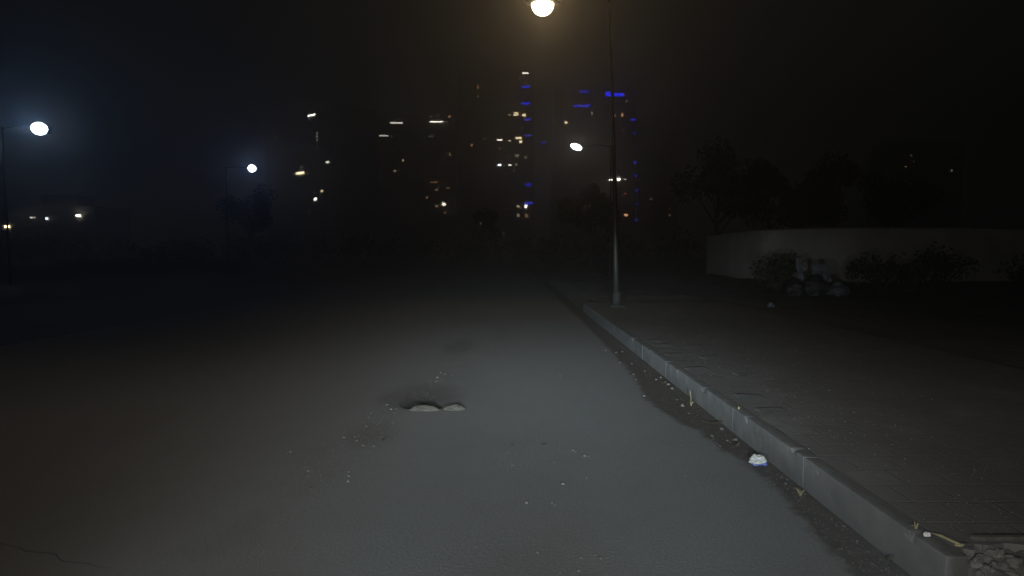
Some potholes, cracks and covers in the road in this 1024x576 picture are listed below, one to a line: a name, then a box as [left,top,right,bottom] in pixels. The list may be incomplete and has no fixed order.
crack [0,543,123,572]
pothole [399,390,446,409]
